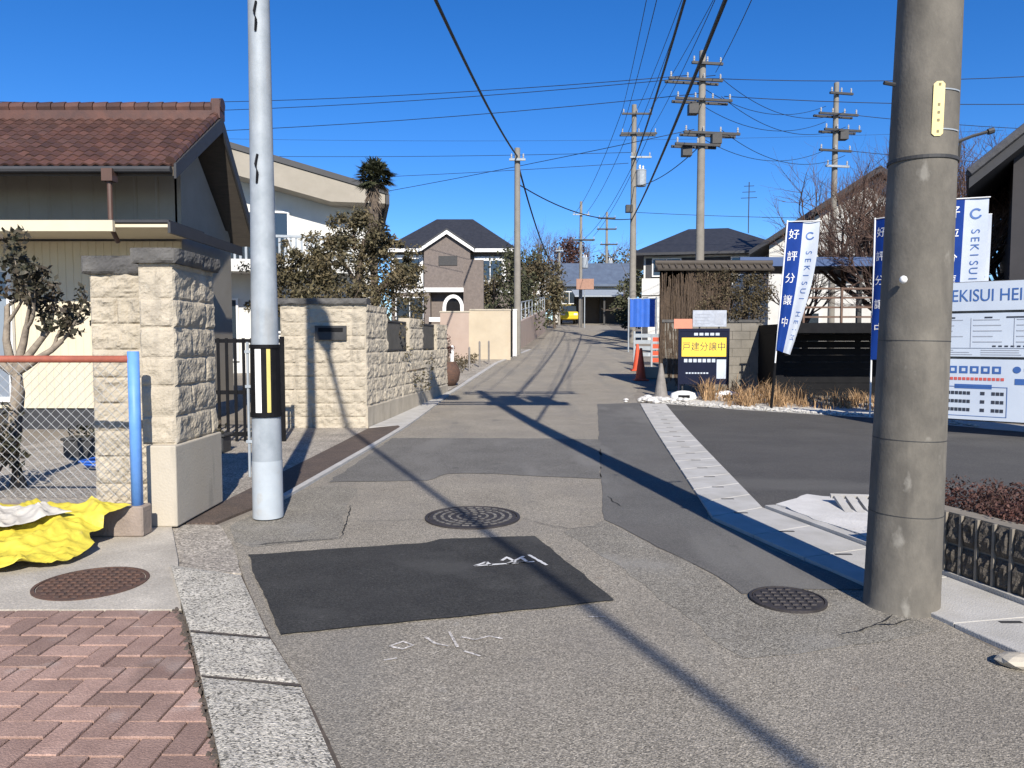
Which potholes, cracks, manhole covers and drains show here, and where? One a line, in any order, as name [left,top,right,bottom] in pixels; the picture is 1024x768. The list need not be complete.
crack [252,506,351,545]
manhole cover [425,506,520,530]
manhole cover [749,586,828,614]
manhole cover [30,567,150,601]
crack [842,614,910,634]
